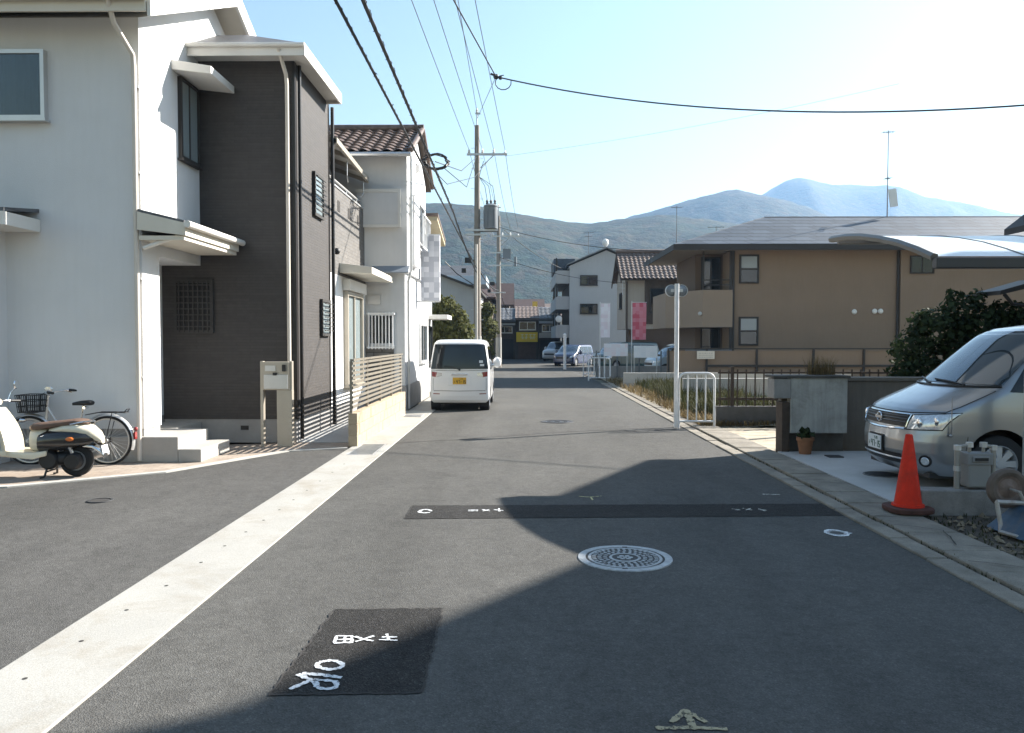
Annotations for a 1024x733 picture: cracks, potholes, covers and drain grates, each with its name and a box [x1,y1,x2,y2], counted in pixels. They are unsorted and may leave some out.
drain grate [346,444,387,455]
manhole cover [578,545,673,572]
